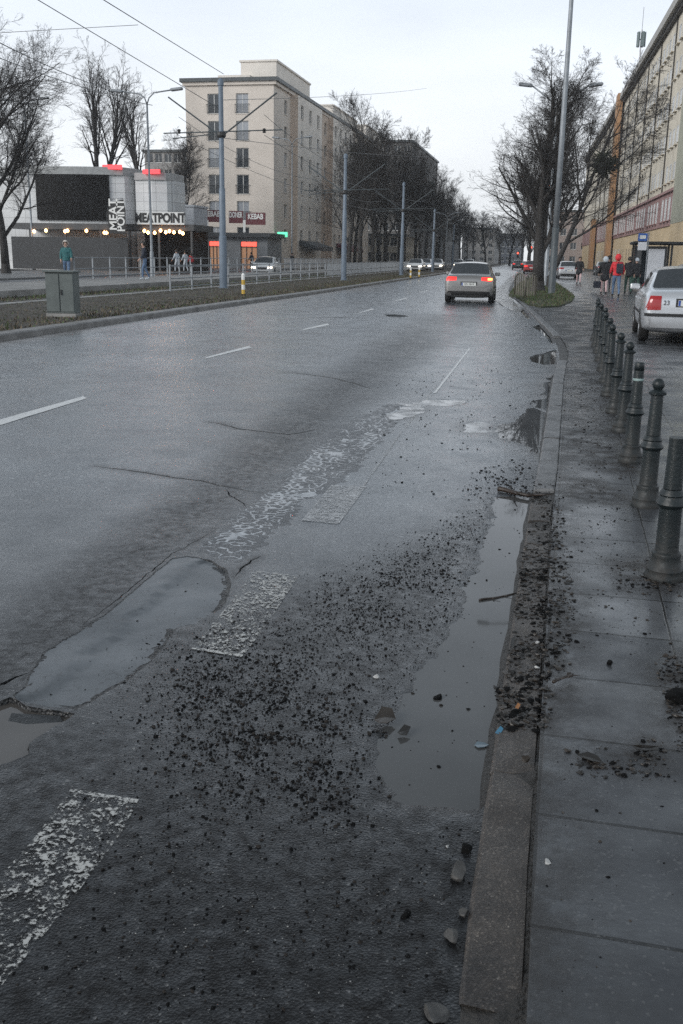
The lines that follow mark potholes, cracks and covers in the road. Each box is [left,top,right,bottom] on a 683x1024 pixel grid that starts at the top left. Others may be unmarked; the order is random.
crack [83,373,403,625]
pothole [0,697,74,764]
pothole [13,556,231,710]
pothole [529,350,557,365]
